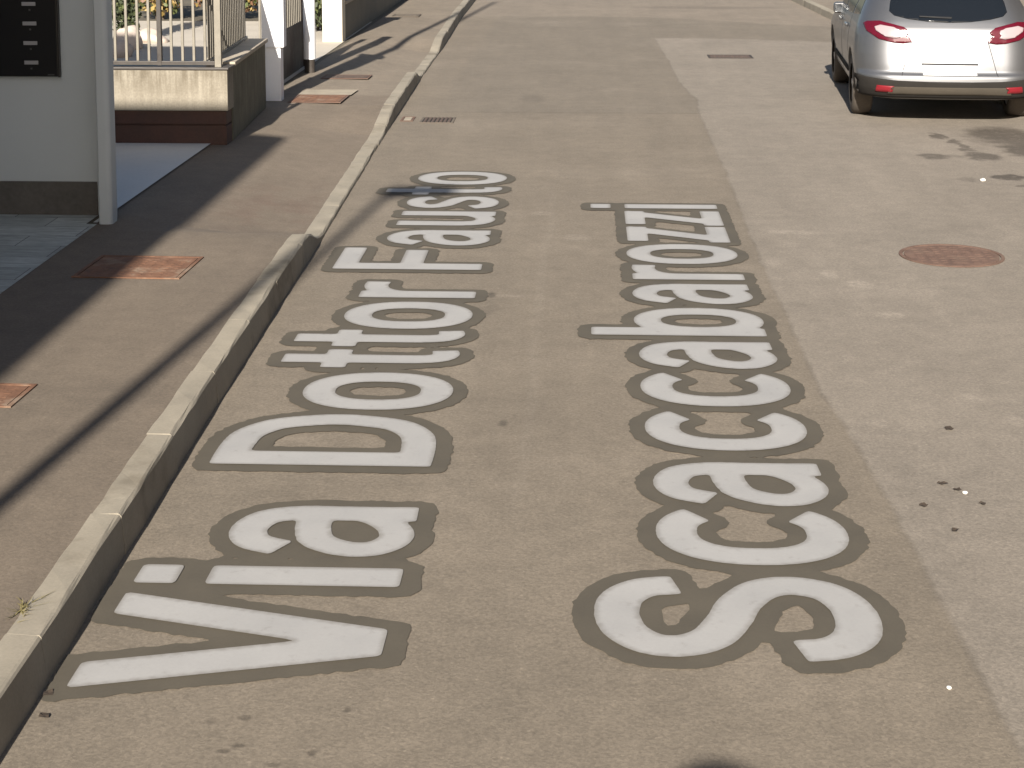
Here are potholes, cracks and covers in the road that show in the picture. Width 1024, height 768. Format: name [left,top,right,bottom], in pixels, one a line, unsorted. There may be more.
manhole cover [899,244,1005,267]
manhole cover [287,94,350,103]
manhole cover [0,383,37,408]
manhole cover [71,255,204,279]
